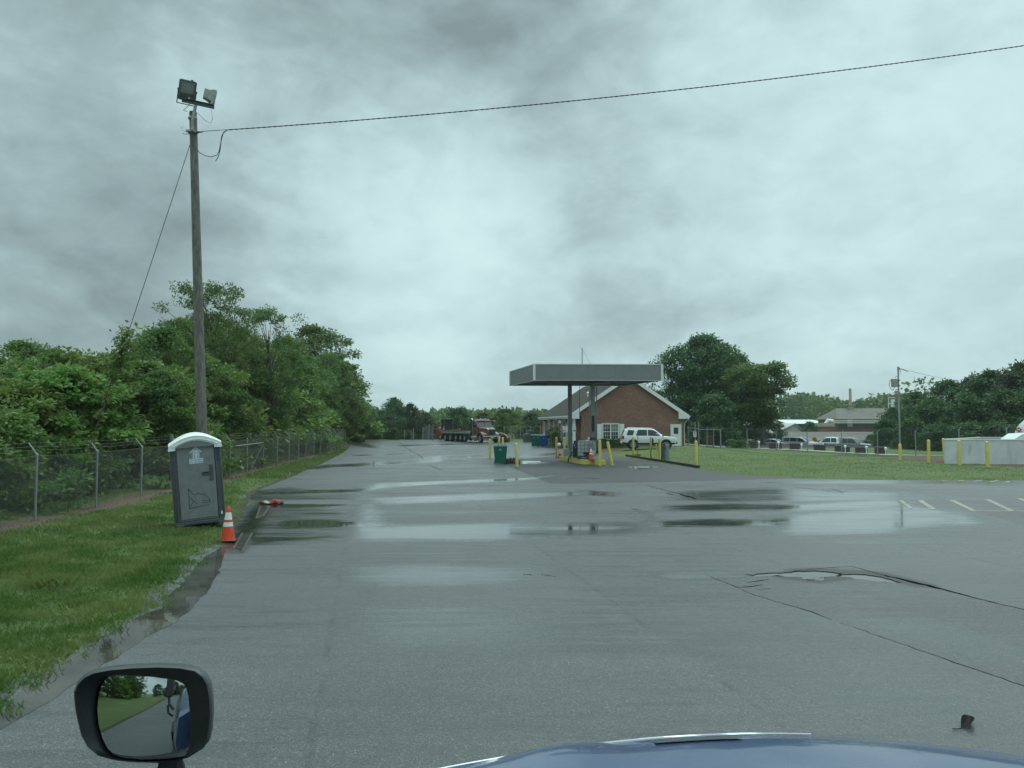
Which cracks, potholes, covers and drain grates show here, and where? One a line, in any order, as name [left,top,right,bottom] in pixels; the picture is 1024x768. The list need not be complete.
crack [793,566,1024,610]
crack [706,575,1024,686]
drain grate [232,533,253,552]
